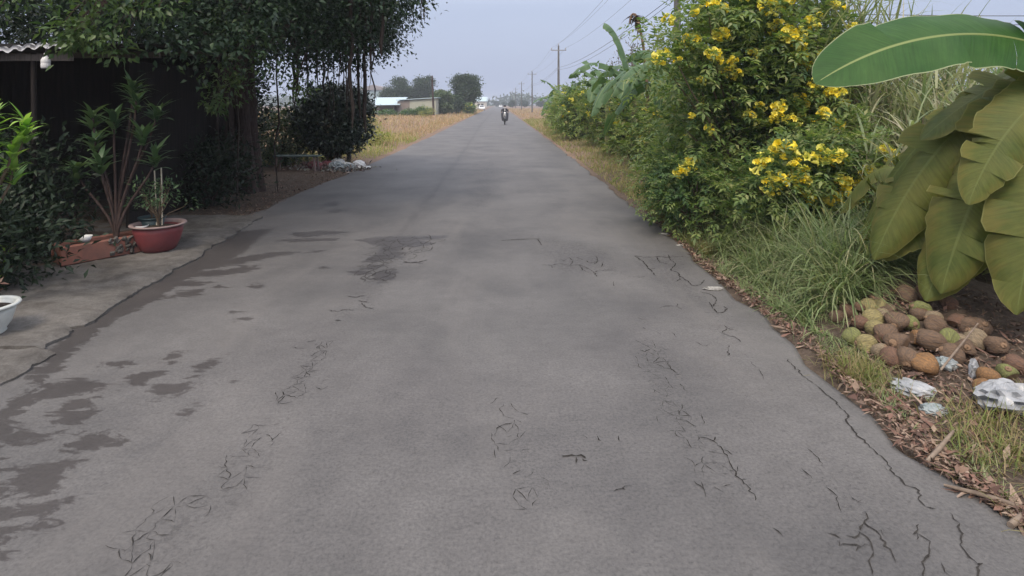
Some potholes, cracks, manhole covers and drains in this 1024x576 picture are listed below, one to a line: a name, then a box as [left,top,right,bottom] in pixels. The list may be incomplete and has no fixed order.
crack [275,340,333,404]
crack [787,360,983,576]
crack [632,255,756,500]
crack [491,400,547,510]
crack [107,495,211,576]
